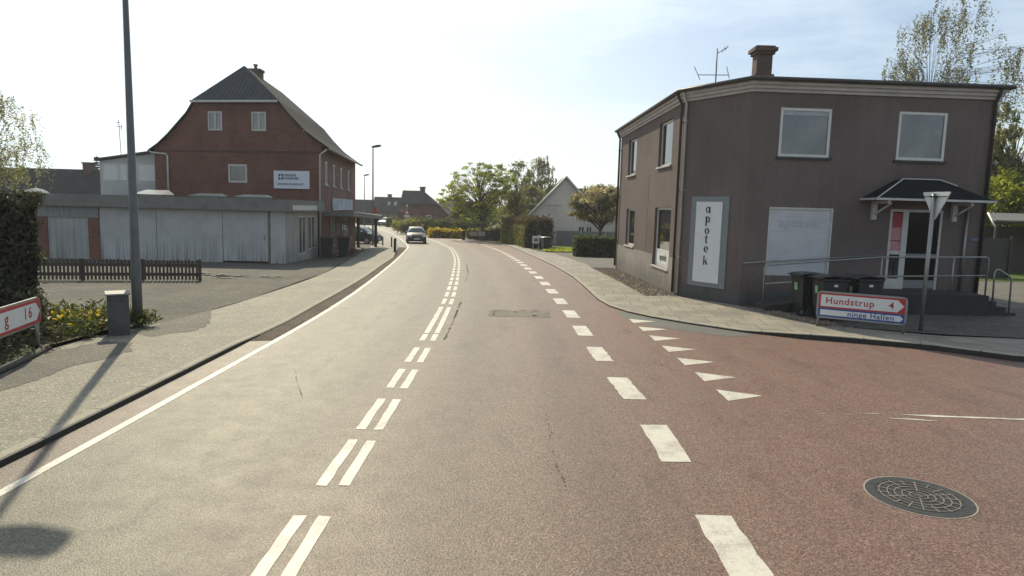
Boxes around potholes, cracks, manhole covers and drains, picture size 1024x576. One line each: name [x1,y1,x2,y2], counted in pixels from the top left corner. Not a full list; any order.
manhole cover [863,476,979,519]
crack [443,248,478,340]
